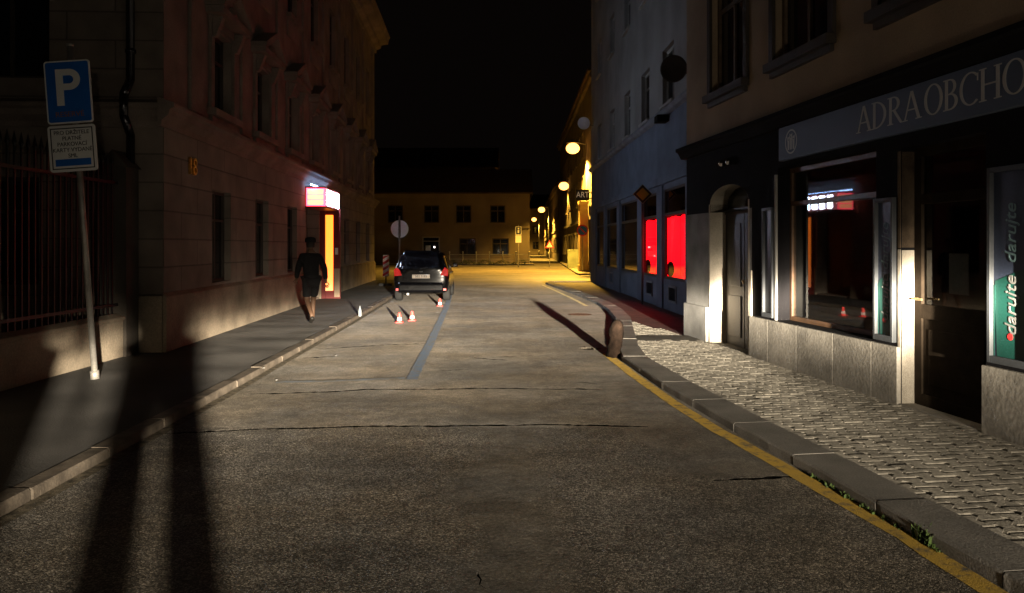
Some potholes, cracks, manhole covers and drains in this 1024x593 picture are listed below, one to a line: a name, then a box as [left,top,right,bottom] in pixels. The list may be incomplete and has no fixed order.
crack [250,382,597,394]
crack [165,424,648,434]
